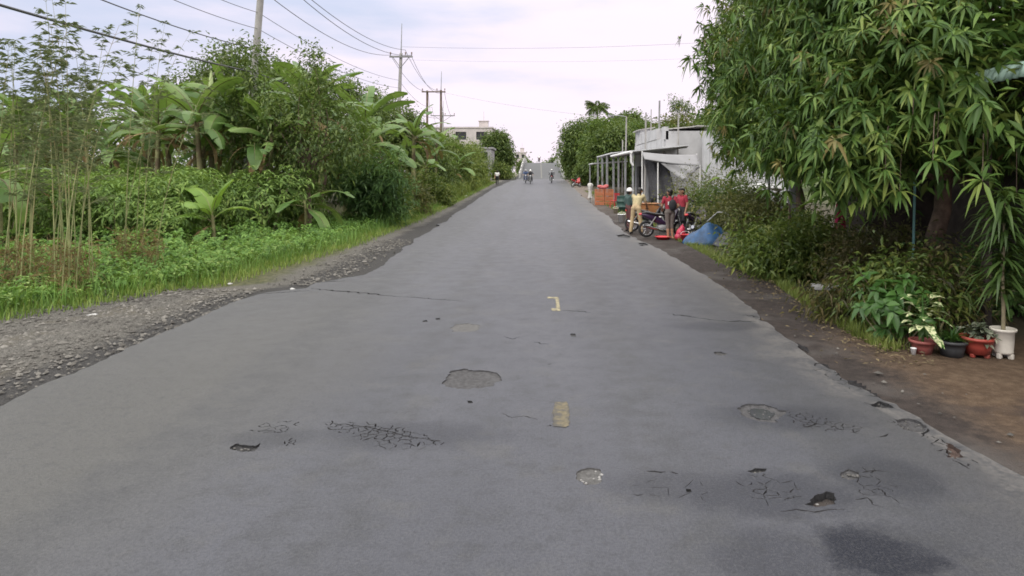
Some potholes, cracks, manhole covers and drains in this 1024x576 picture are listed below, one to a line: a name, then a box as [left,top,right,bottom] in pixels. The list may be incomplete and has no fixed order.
pothole [230,443,260,452]
pothole [805,491,836,506]
crack [326,421,444,449]
crack [633,471,706,502]
crack [250,421,299,446]
crack [786,410,862,433]
pothole [946,443,963,459]
crack [737,467,900,513]
